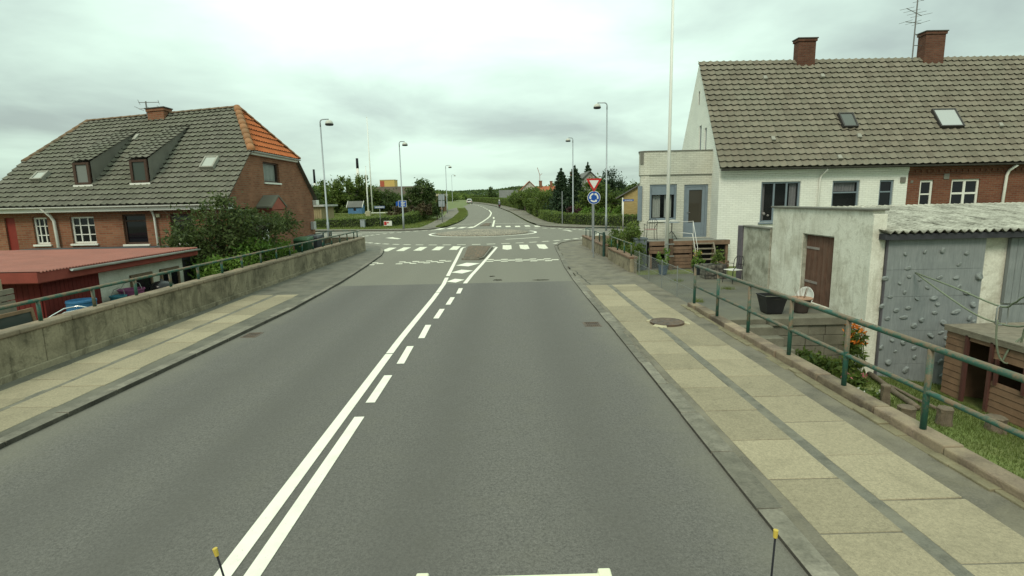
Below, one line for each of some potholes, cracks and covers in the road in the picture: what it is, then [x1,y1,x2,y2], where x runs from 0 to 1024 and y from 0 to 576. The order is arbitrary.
manhole cover [647,318,690,328]
